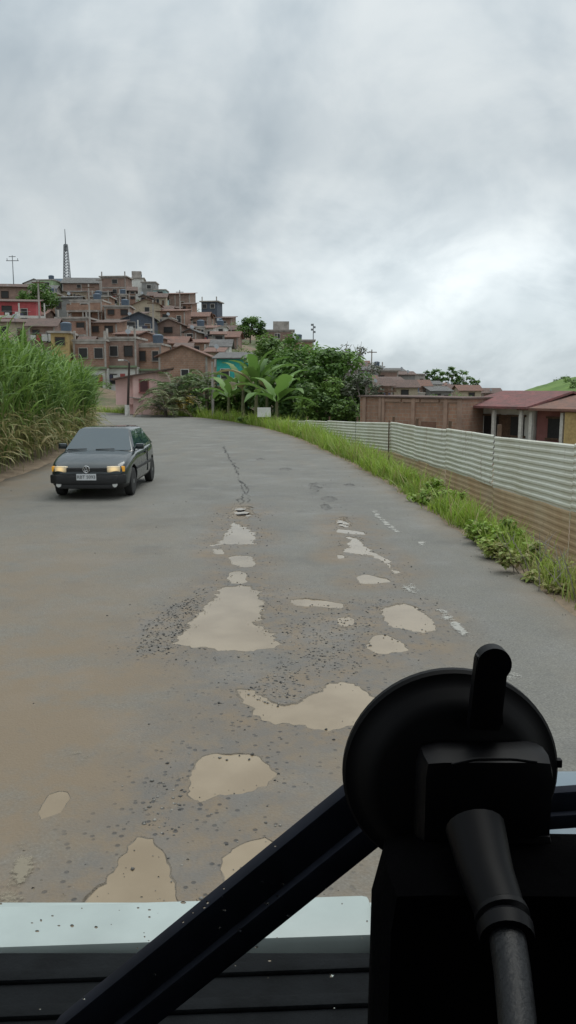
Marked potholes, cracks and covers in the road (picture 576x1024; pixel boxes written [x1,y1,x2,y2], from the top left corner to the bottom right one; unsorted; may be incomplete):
pothole [228,555,256,567]
pothole [219,837,273,882]
pothole [379,603,438,633]
pothole [38,791,71,820]
pothole [290,598,344,608]
pothole [235,681,376,732]
pothole [343,536,401,574]
pothole [226,571,248,586]
pothole [169,585,284,652]
pothole [208,521,258,546]
pothole [356,574,391,584]
pothole [186,753,278,802]
